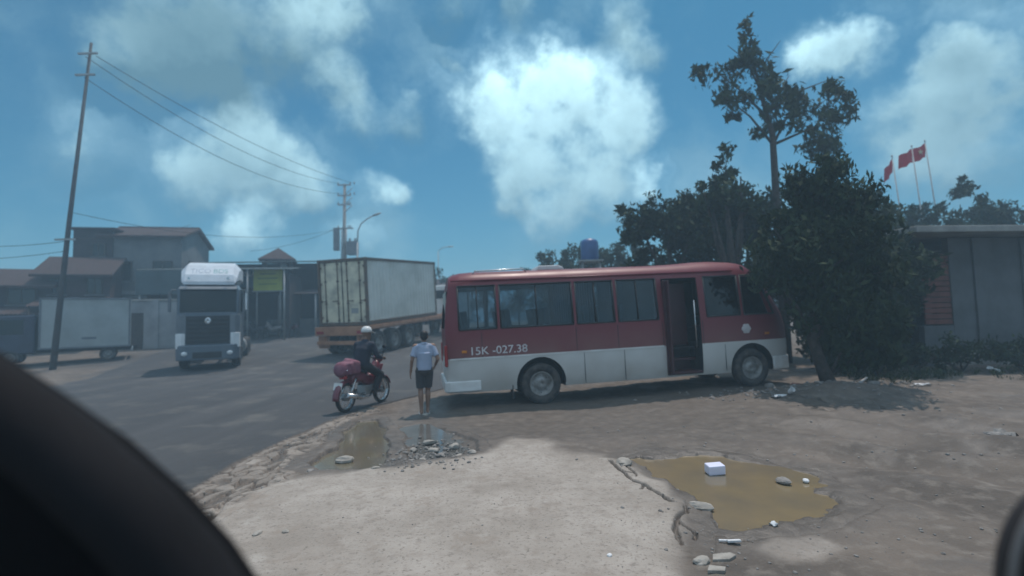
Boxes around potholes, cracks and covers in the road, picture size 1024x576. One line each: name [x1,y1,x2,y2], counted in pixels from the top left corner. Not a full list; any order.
pothole [391,422,492,464]
pothole [296,416,398,473]
pothole [618,447,881,541]
crack [593,457,718,559]
